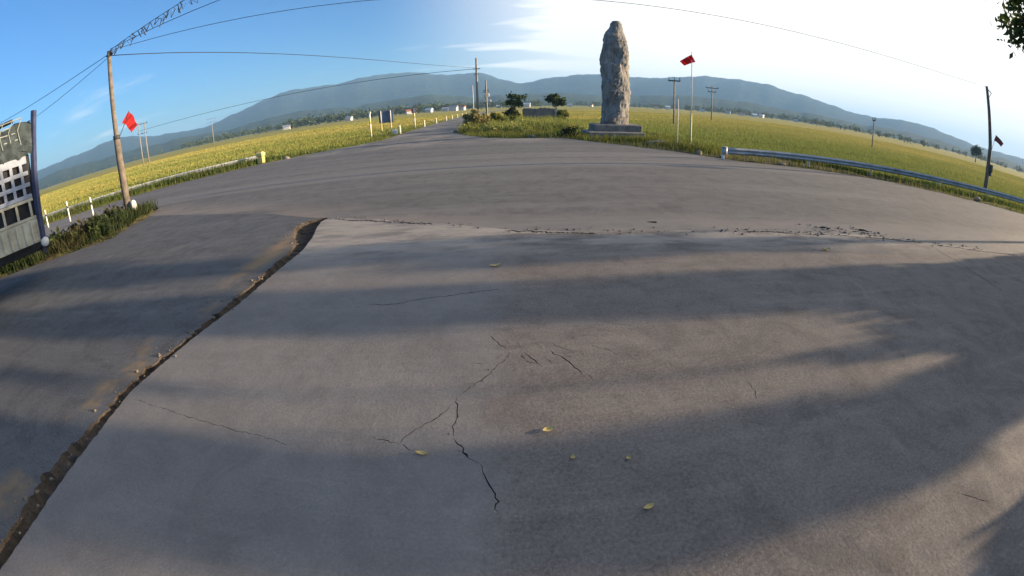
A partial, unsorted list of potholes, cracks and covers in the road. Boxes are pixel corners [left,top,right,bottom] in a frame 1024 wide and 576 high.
crack [378,336,612,514]
crack [371,289,500,305]
crack [0,251,300,569]
